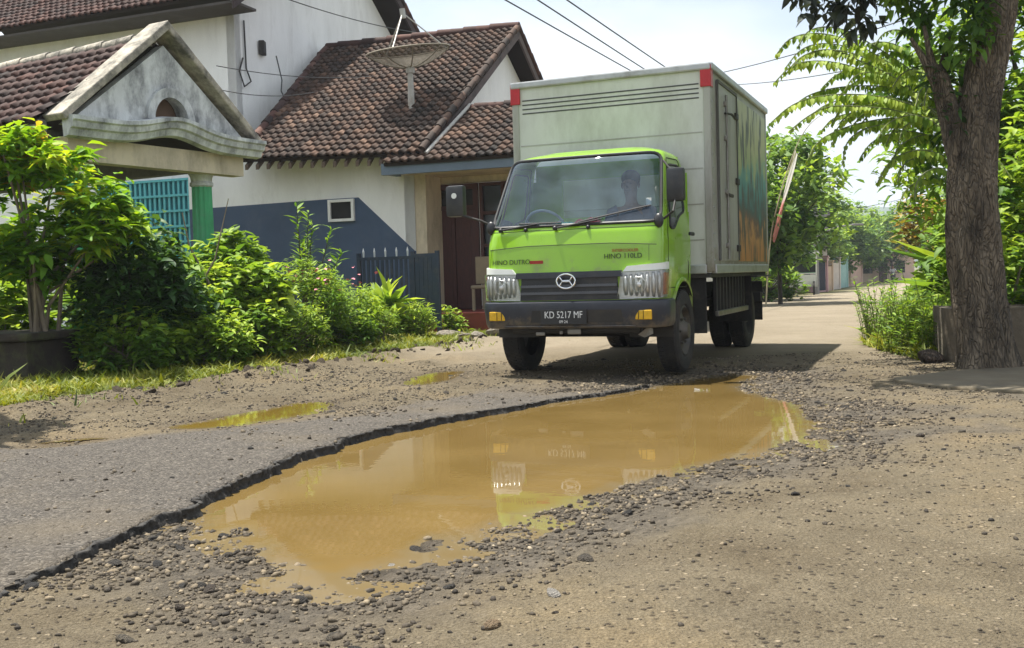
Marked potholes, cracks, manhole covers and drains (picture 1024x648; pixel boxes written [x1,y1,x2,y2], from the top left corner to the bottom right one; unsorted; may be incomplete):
pothole [0,370,880,648]
